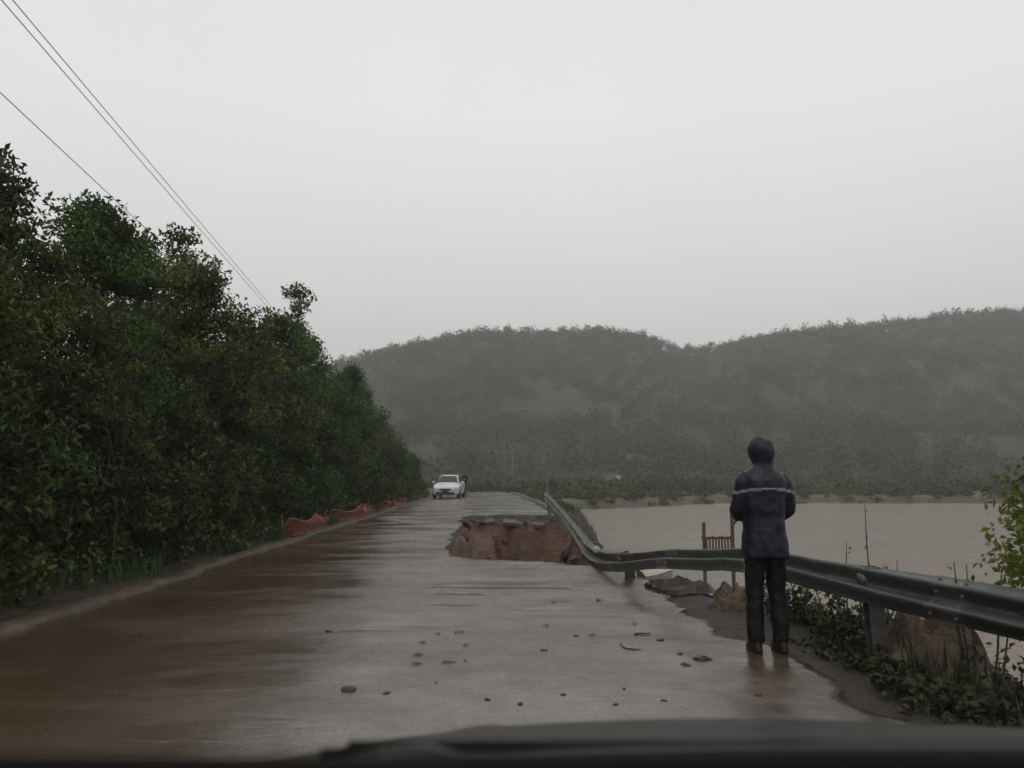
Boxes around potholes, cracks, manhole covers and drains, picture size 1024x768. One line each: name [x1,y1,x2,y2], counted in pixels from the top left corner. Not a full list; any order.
pothole [450,518,603,565]
